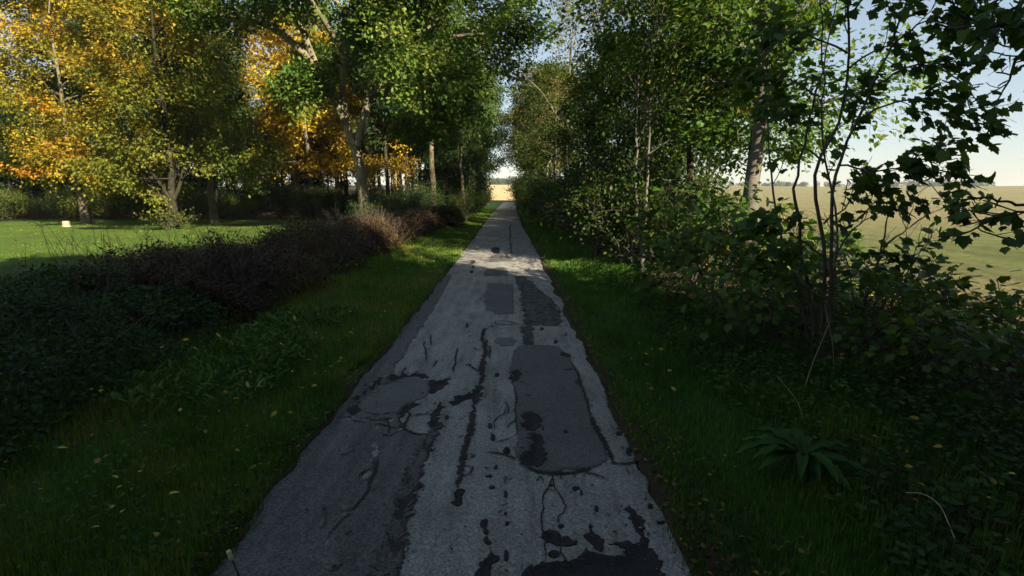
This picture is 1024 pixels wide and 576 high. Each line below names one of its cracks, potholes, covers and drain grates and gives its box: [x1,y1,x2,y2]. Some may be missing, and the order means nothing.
crack [461,394,639,561]
crack [327,459,379,535]
crack [352,401,441,436]
